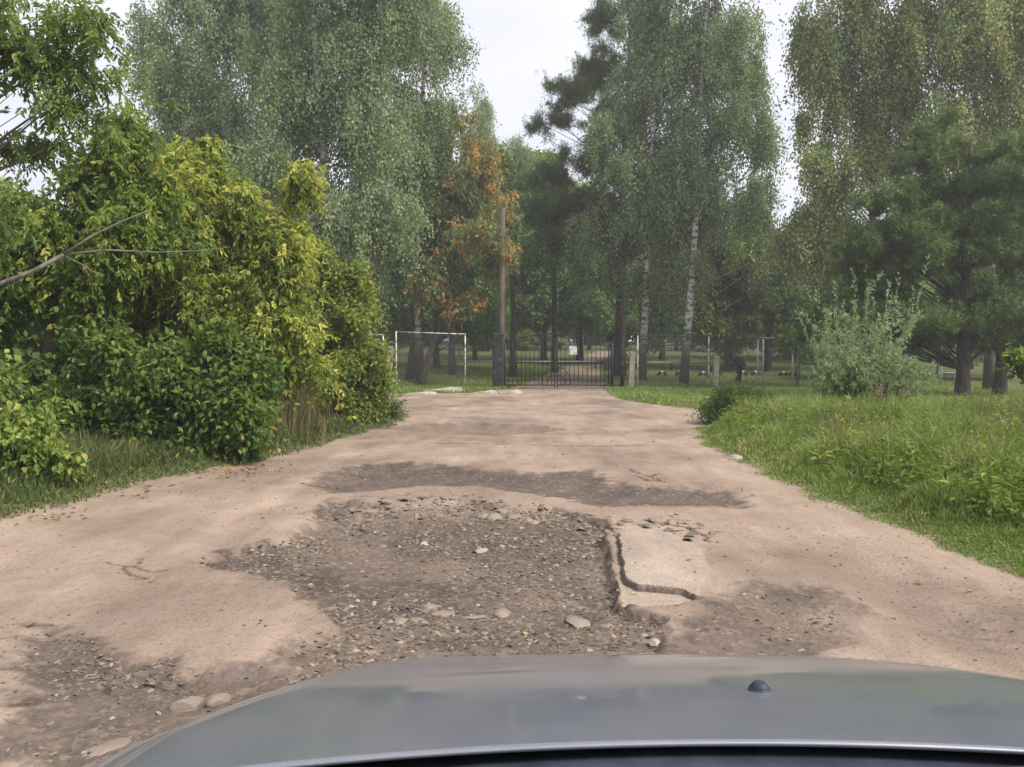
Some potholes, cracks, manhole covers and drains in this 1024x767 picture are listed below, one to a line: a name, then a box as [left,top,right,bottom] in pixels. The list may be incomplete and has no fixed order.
crack [630,469,668,483]
crack [104,559,167,580]
pothole [0,624,310,767]
pothole [193,498,674,680]
crack [645,519,709,542]
